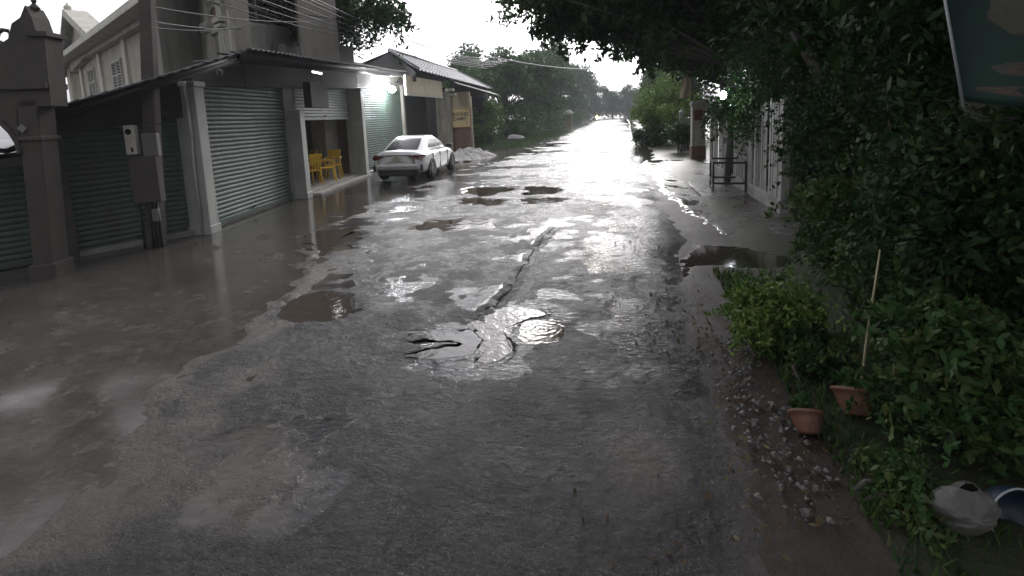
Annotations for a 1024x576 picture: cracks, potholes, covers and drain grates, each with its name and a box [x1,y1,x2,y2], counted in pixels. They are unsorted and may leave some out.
pothole [511,317,572,348]
pothole [512,196,579,206]
pothole [270,288,362,326]
pothole [518,185,573,197]
pothole [448,195,517,207]
pothole [466,305,551,368]
pothole [397,327,483,364]
pothole [454,184,524,198]
crack [469,225,561,322]
